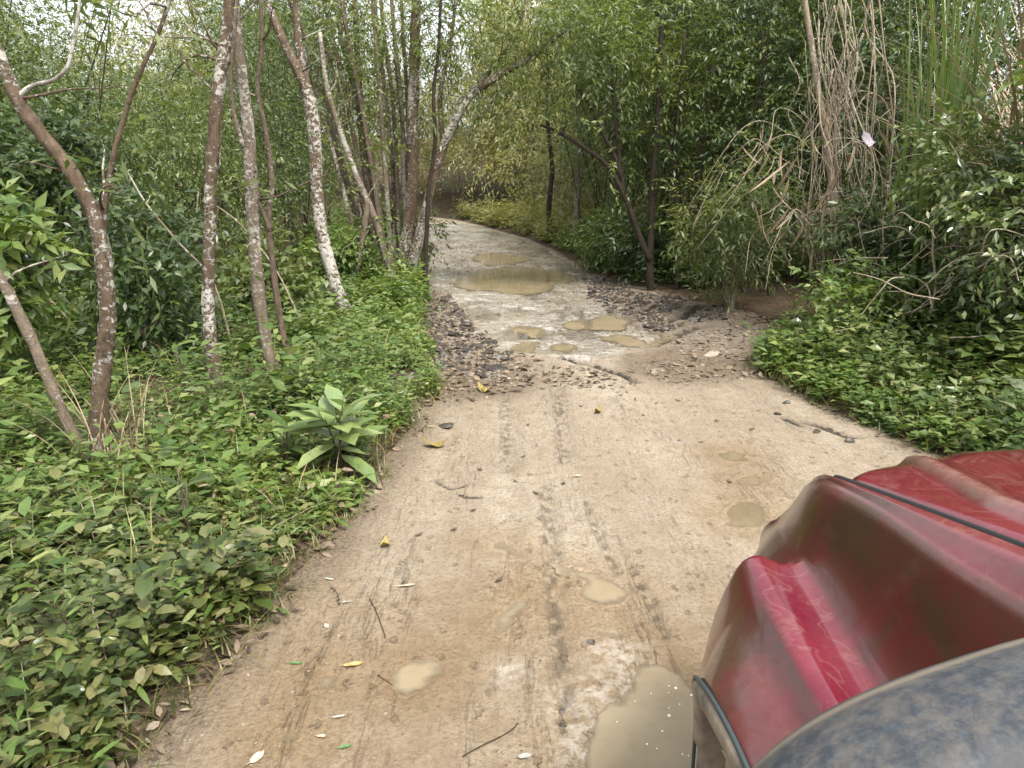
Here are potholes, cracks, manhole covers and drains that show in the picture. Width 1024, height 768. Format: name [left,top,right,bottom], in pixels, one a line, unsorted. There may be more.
pothole [472,253,533,266]
pothole [377,654,449,699]
pothole [588,316,630,332]
pothole [453,267,578,296]
pothole [718,496,775,533]
pothole [563,321,591,331]
pothole [712,448,758,465]
pothole [729,472,768,488]
pothole [600,334,648,348]
pothole [579,656,731,768]
pothole [547,342,584,354]
pothole [552,562,633,608]
